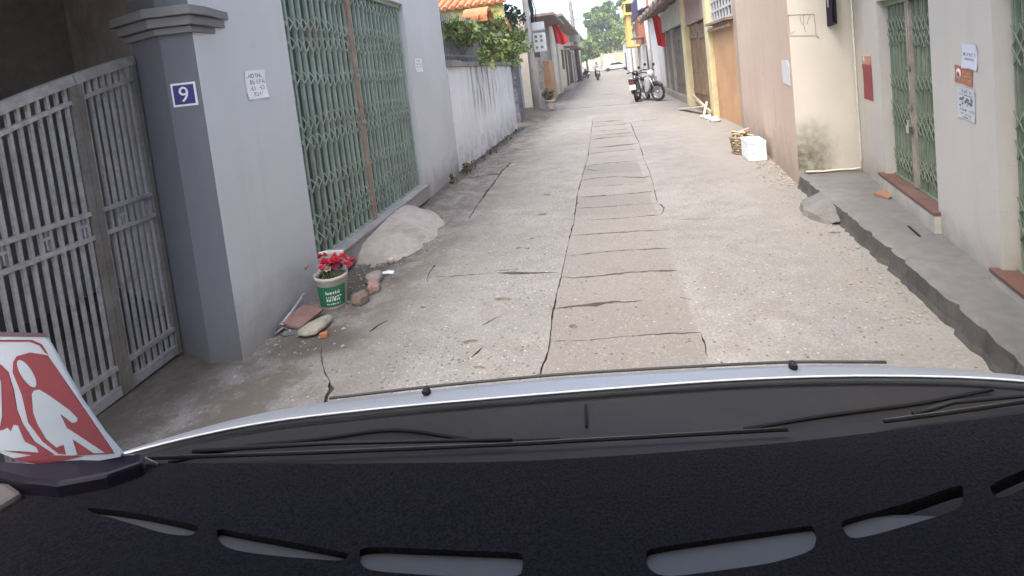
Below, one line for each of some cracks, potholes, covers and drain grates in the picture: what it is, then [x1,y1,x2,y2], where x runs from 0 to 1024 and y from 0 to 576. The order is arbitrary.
crack [427,94,739,282]
crack [321,346,335,402]
